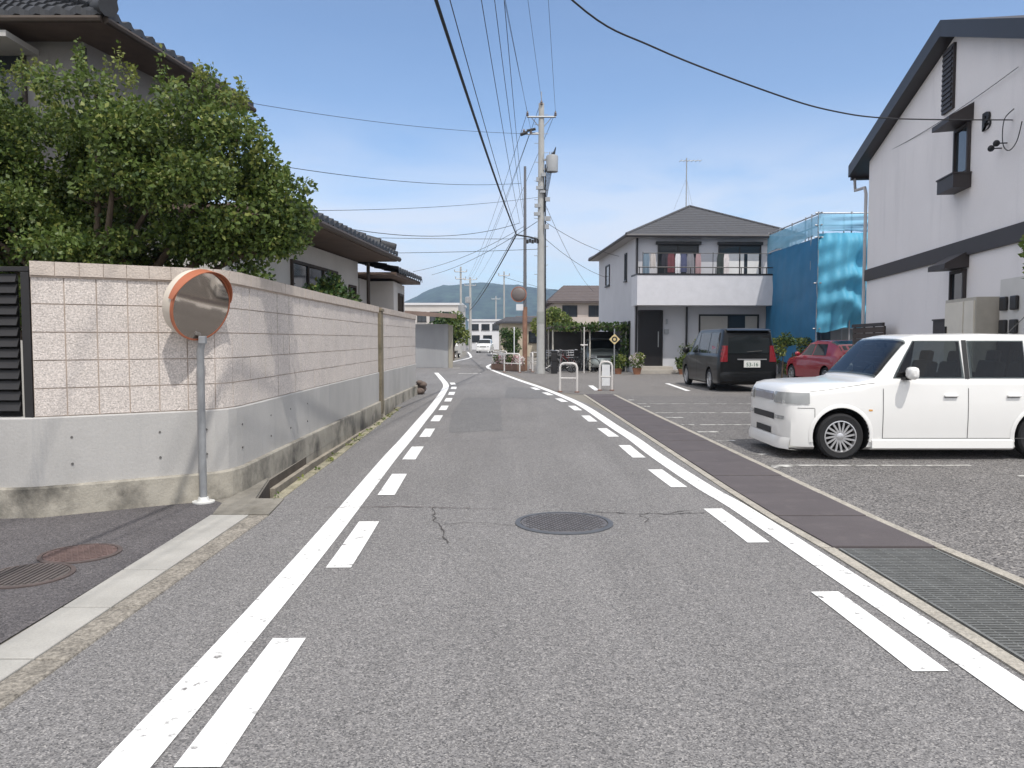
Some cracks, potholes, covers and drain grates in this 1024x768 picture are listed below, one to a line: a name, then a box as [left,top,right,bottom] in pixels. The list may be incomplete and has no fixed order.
crack [308,506,514,543]
manhole cover [0,563,76,589]
drain grate [927,601,1024,662]
manhole cover [37,543,123,564]
drain grate [839,548,1024,603]
manhole cover [515,512,613,535]
